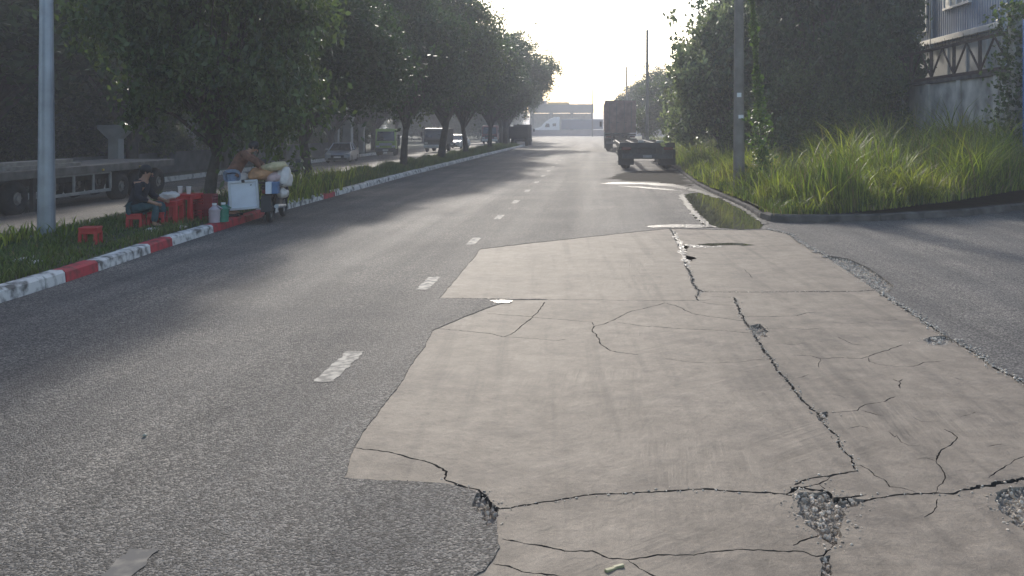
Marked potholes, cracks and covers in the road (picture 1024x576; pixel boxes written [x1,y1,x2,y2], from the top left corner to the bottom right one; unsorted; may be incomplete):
pothole [909,336,957,347]
crack [495,536,833,576]
pothole [472,493,512,526]
pothole [780,482,874,576]
crack [354,270,1024,517]
pothole [744,323,772,339]
pothole [971,479,1024,531]
